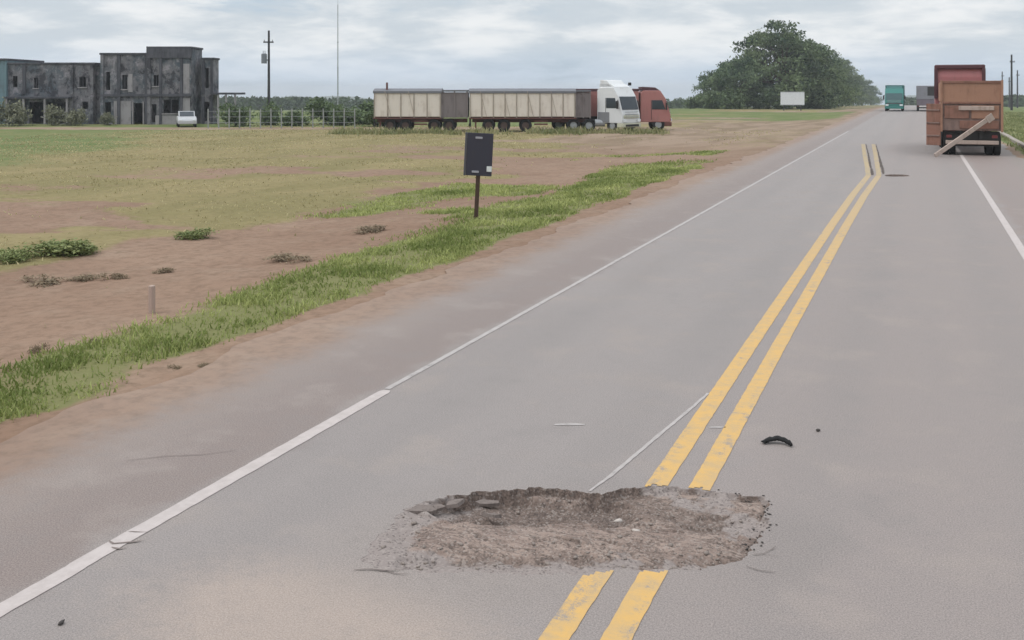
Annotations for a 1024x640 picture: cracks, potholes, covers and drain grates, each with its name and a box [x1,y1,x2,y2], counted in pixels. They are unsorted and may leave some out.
pothole [361,486,778,576]
